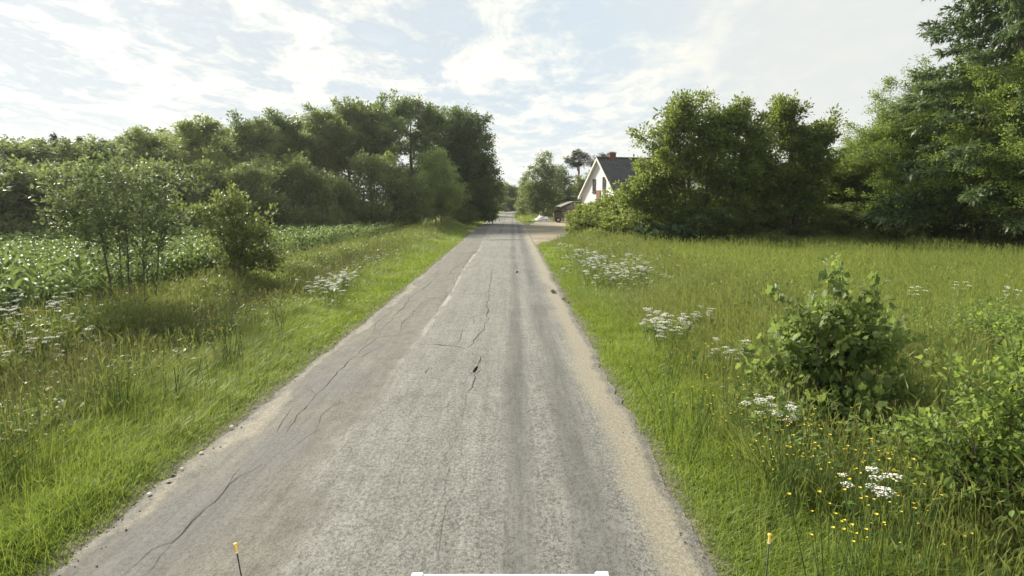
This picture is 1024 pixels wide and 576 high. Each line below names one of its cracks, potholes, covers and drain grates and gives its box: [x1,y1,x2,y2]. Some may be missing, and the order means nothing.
crack [123,465,261,574]
crack [277,251,492,557]
